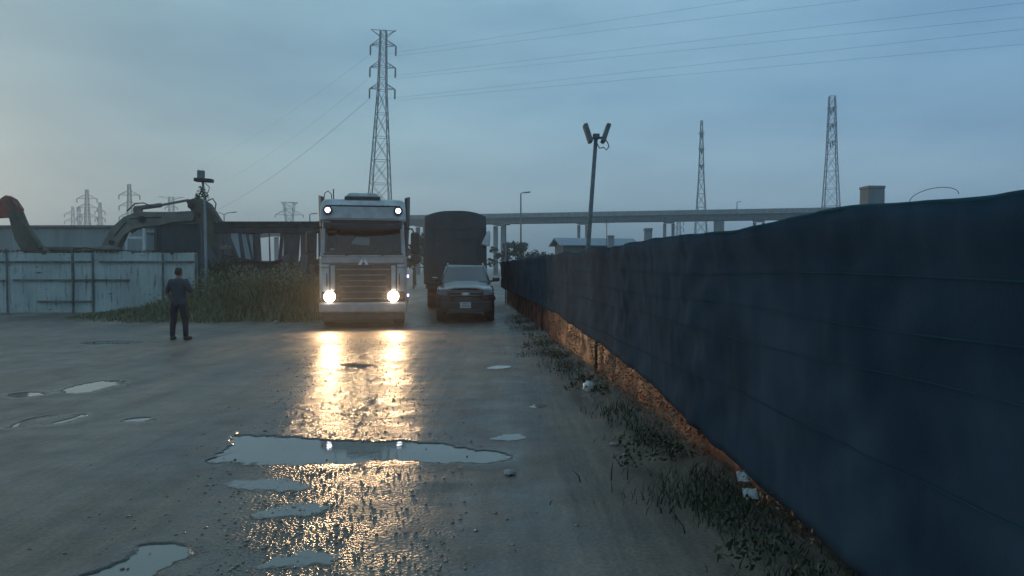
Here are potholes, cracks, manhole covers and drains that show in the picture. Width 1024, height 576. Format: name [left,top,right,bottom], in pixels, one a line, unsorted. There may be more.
pothole [41,378,142,396]
pothole [0,389,66,400]
pothole [40,531,231,576]
pothole [179,430,536,473]
pothole [0,411,80,432]
pothole [18,410,108,429]
